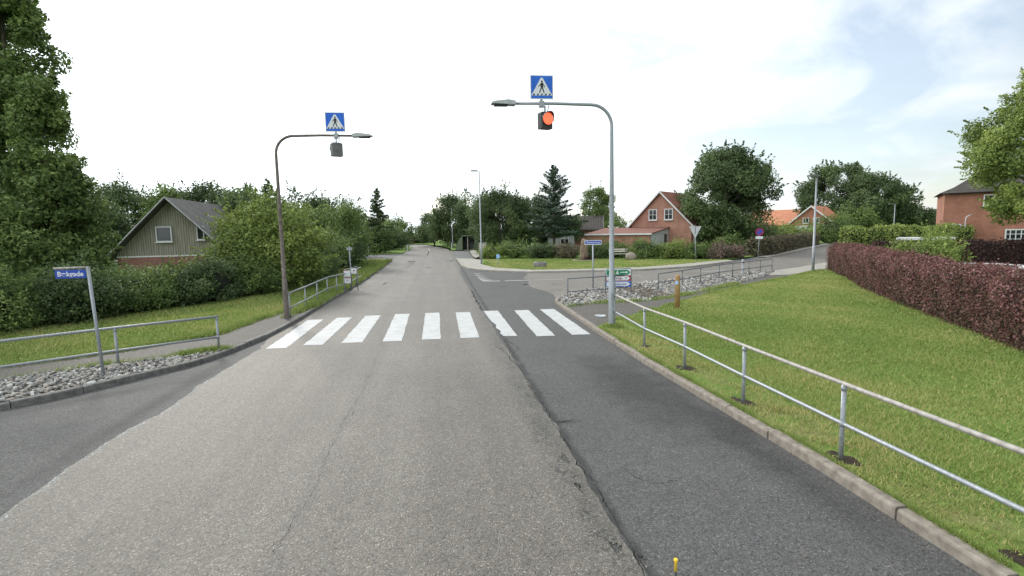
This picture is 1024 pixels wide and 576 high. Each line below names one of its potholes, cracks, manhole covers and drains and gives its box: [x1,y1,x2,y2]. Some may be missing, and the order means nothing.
crack [270,371,374,555]
